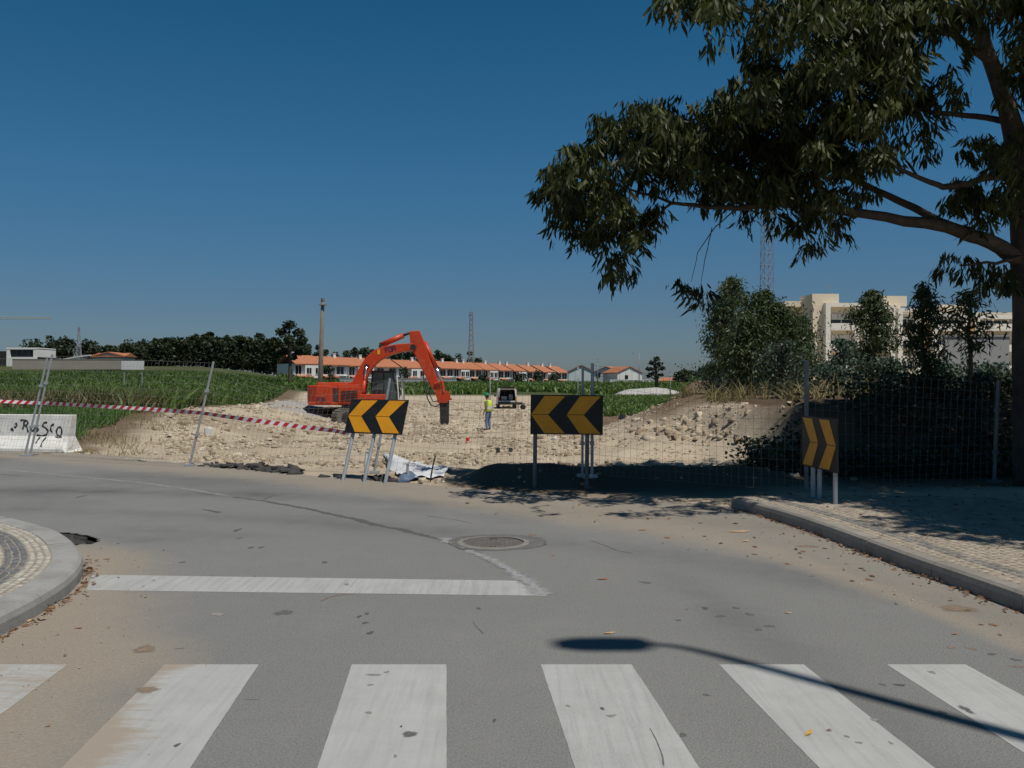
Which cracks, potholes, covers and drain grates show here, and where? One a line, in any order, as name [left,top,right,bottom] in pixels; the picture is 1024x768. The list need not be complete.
pothole [60,533,96,545]
manhole cover [448,534,547,551]
